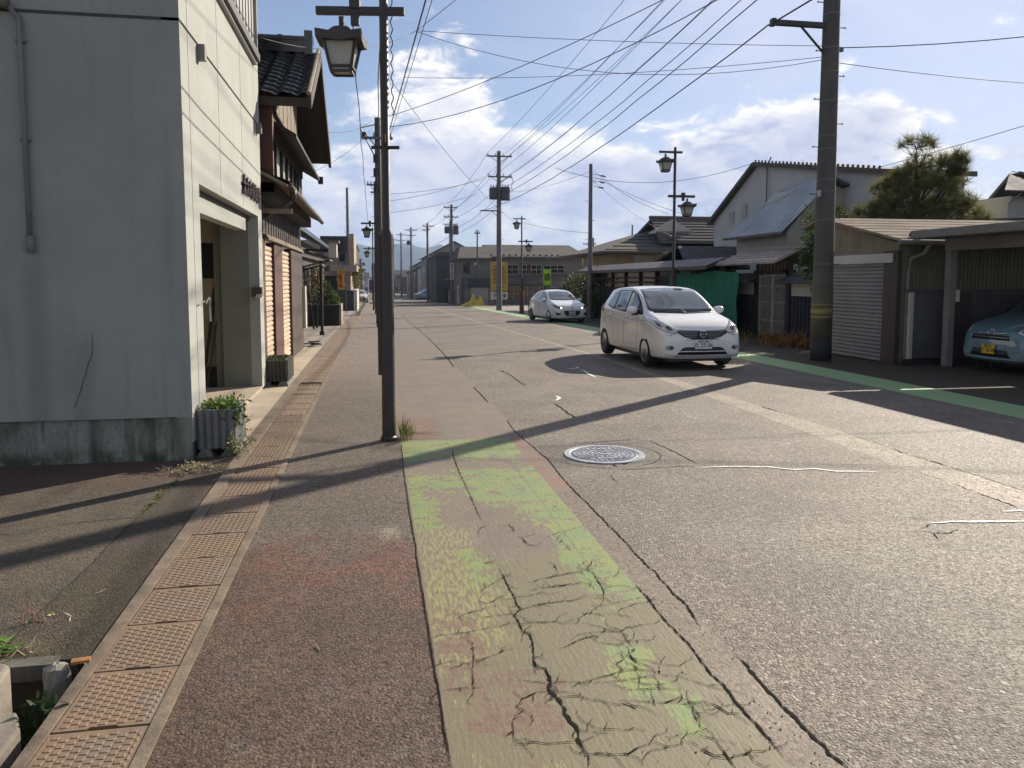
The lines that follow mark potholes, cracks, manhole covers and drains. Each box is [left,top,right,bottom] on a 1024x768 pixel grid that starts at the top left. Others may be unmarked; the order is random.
manhole cover [554,439,696,469]
crack [429,419,848,768]
